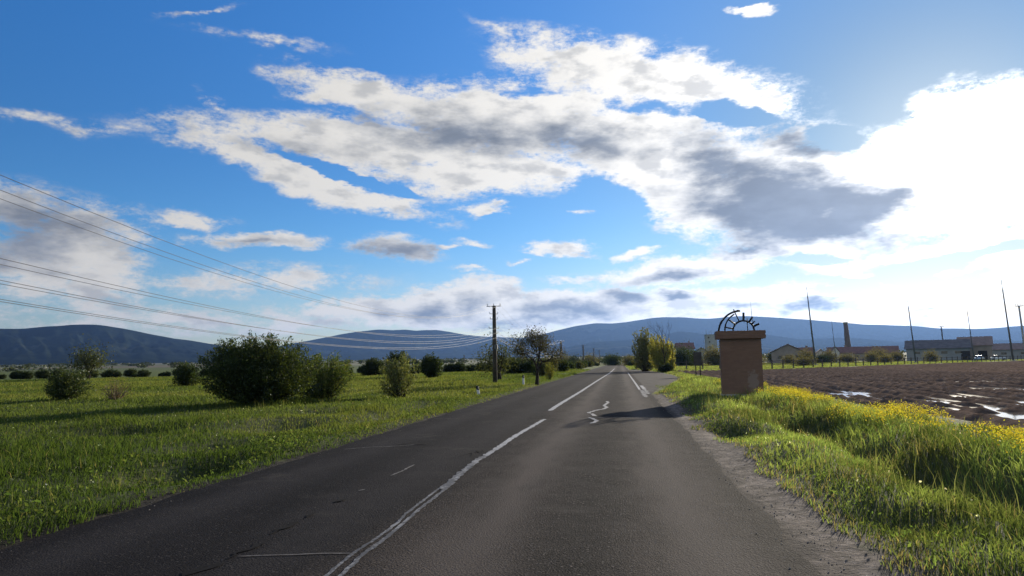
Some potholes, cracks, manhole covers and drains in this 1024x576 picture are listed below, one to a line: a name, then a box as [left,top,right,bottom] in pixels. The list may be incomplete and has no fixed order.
crack [182,465,413,576]
